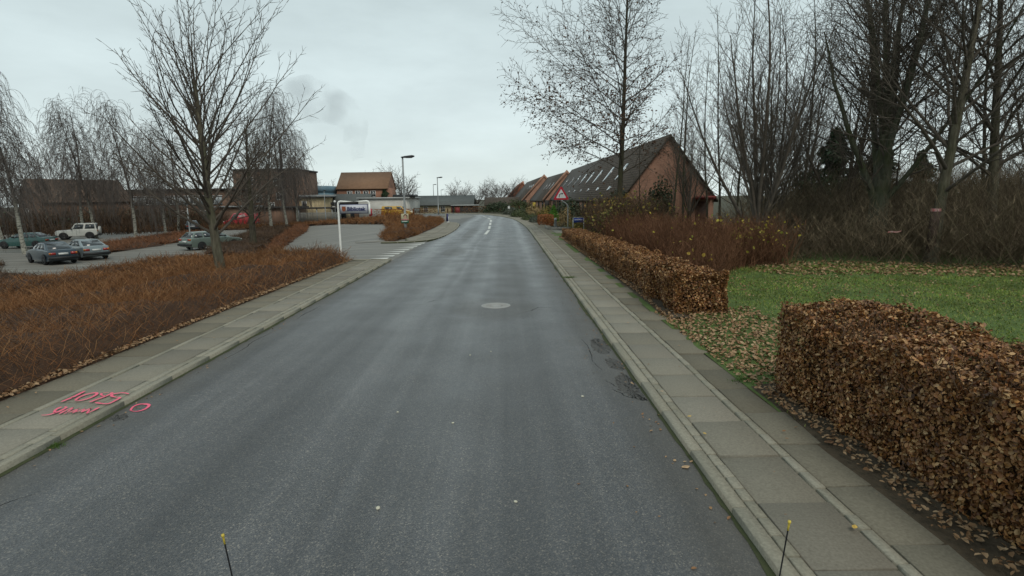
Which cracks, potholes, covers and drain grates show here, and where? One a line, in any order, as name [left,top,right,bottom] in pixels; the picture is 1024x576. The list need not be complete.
pothole [605,358,625,371]
pothole [107,413,129,422]
pothole [614,373,647,401]
pothole [590,338,611,355]
